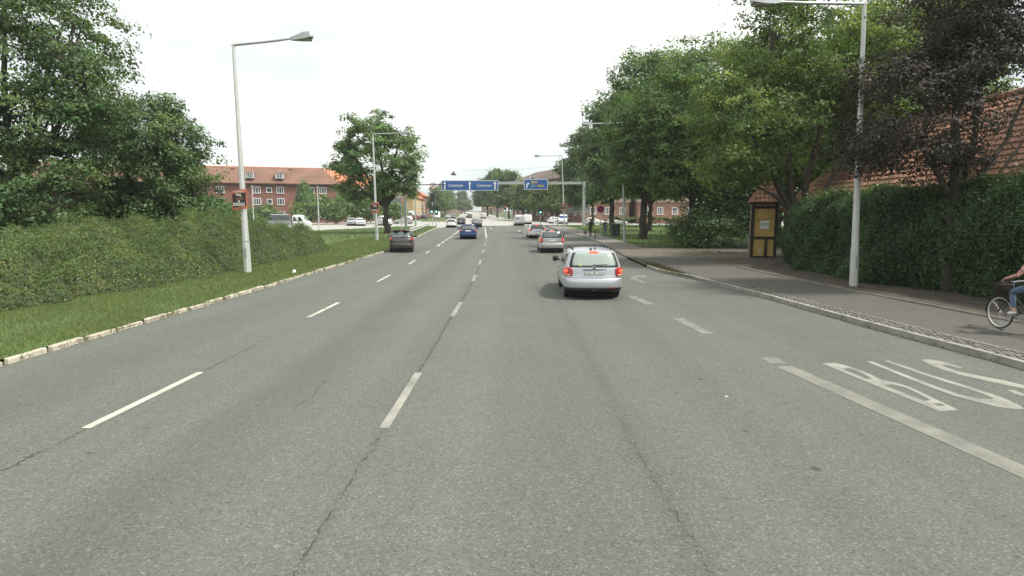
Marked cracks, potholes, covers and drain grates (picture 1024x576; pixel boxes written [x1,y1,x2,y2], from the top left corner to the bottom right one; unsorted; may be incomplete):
crack [627,438,715,573]
